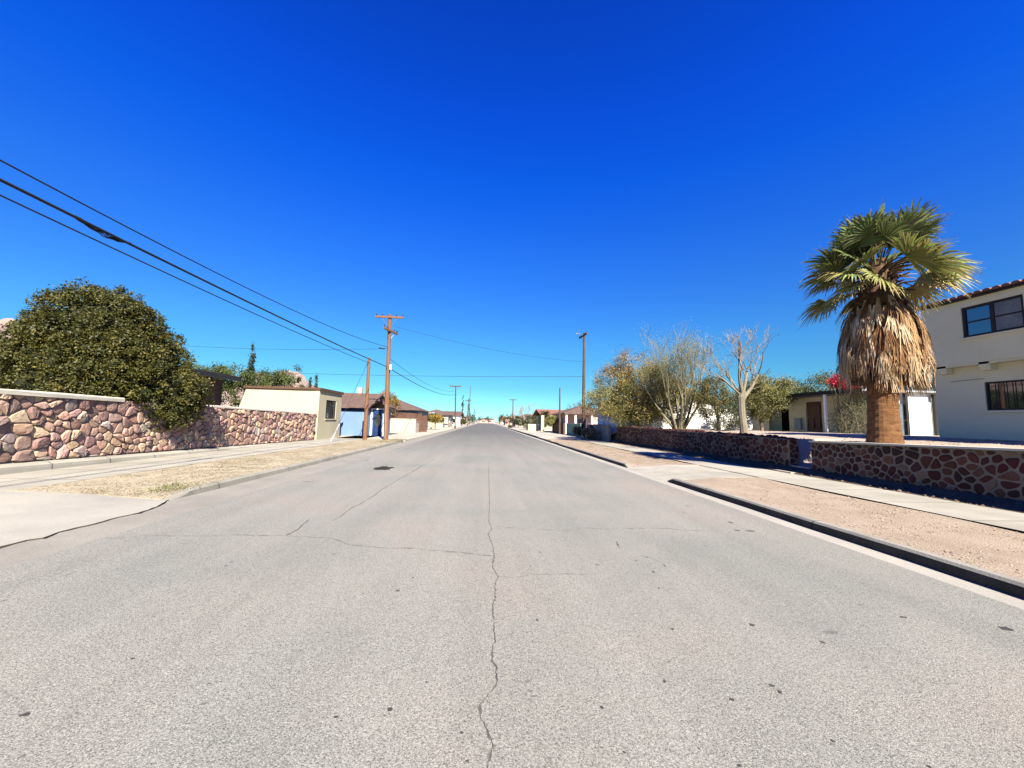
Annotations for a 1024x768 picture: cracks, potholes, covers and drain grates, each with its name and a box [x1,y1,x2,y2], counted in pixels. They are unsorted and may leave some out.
crack [507,527,704,548]
crack [107,469,591,768]
